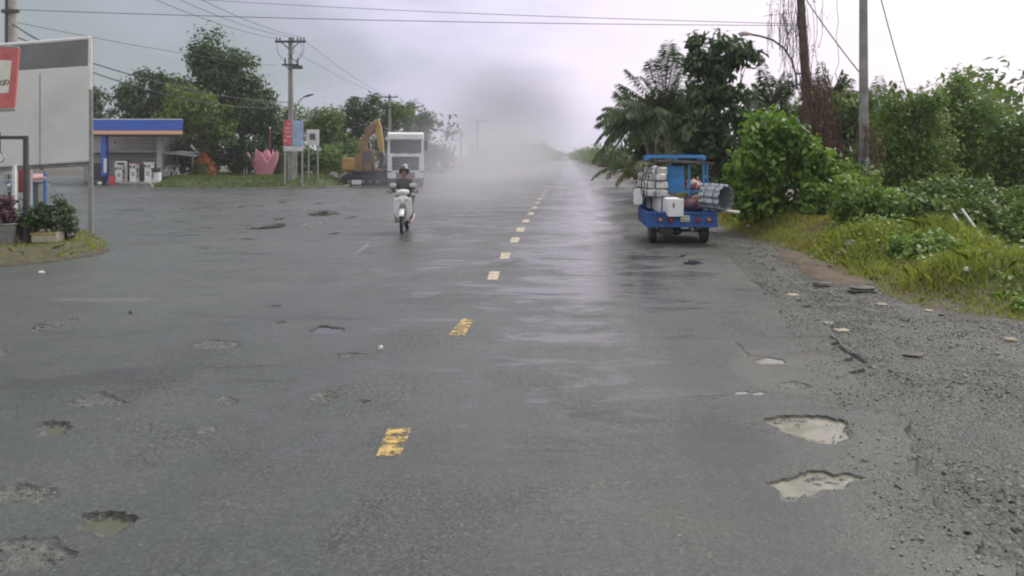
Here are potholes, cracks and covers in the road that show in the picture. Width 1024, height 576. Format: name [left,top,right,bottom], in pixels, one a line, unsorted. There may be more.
pothole [765,470,866,502]
crack [823,324,869,361]
pothole [76,510,140,537]
pothole [776,381,813,390]
pothole [0,535,79,575]
pothole [763,415,858,445]
pothole [35,419,74,438]
pothole [190,339,242,349]
pothole [26,318,81,333]
pothole [310,390,338,402]
pothole [0,483,60,504]
pothole [217,396,239,405]
